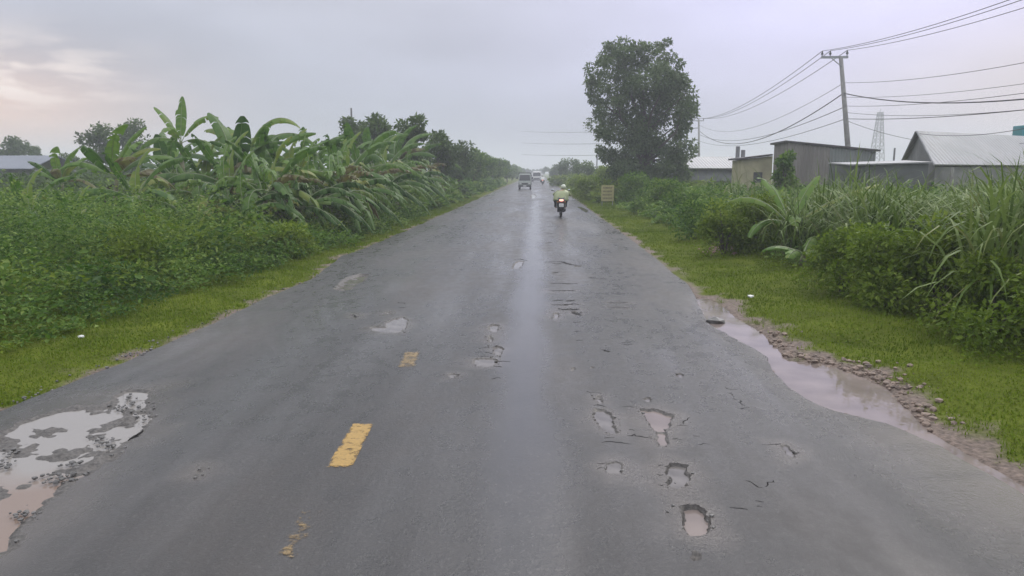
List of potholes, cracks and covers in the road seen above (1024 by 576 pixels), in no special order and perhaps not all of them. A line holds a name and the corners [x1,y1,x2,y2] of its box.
pothole [678,503,712,538]
pothole [605,461,623,474]
pothole [664,463,692,489]
pothole [640,408,676,446]
pothole [0,388,157,556]
crack [551,261,602,341]
pothole [472,357,499,367]
pothole [333,273,370,291]
pothole [592,408,619,434]
pothole [369,317,409,333]
